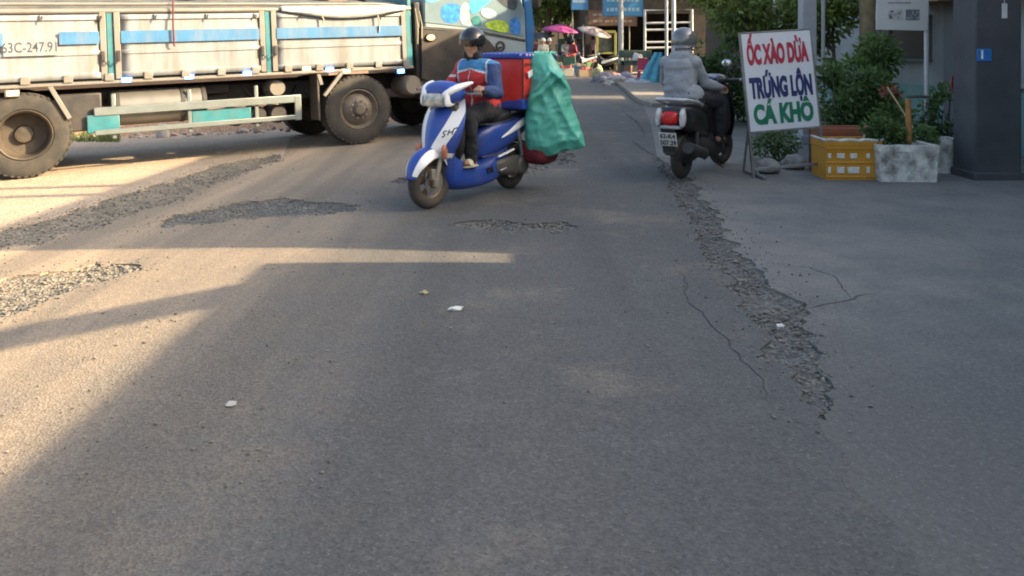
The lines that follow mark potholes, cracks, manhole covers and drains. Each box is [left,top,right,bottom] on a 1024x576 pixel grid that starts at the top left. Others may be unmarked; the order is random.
pothole [454,220,576,234]
crack [683,279,767,400]
crack [811,268,866,307]
pothole [656,158,834,420]
pothole [0,154,281,249]
pothole [0,264,140,318]
pothole [159,199,359,228]
